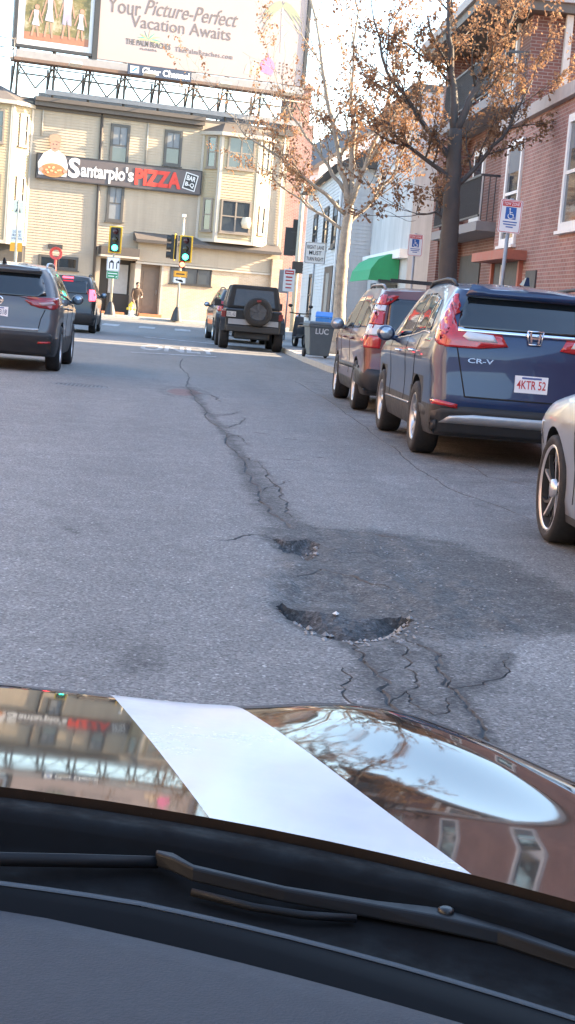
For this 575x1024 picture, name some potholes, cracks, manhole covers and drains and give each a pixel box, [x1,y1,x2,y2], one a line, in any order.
pothole [265,535,321,561]
crack [179,359,296,541]
crack [340,637,511,742]
pothole [276,603,414,642]
